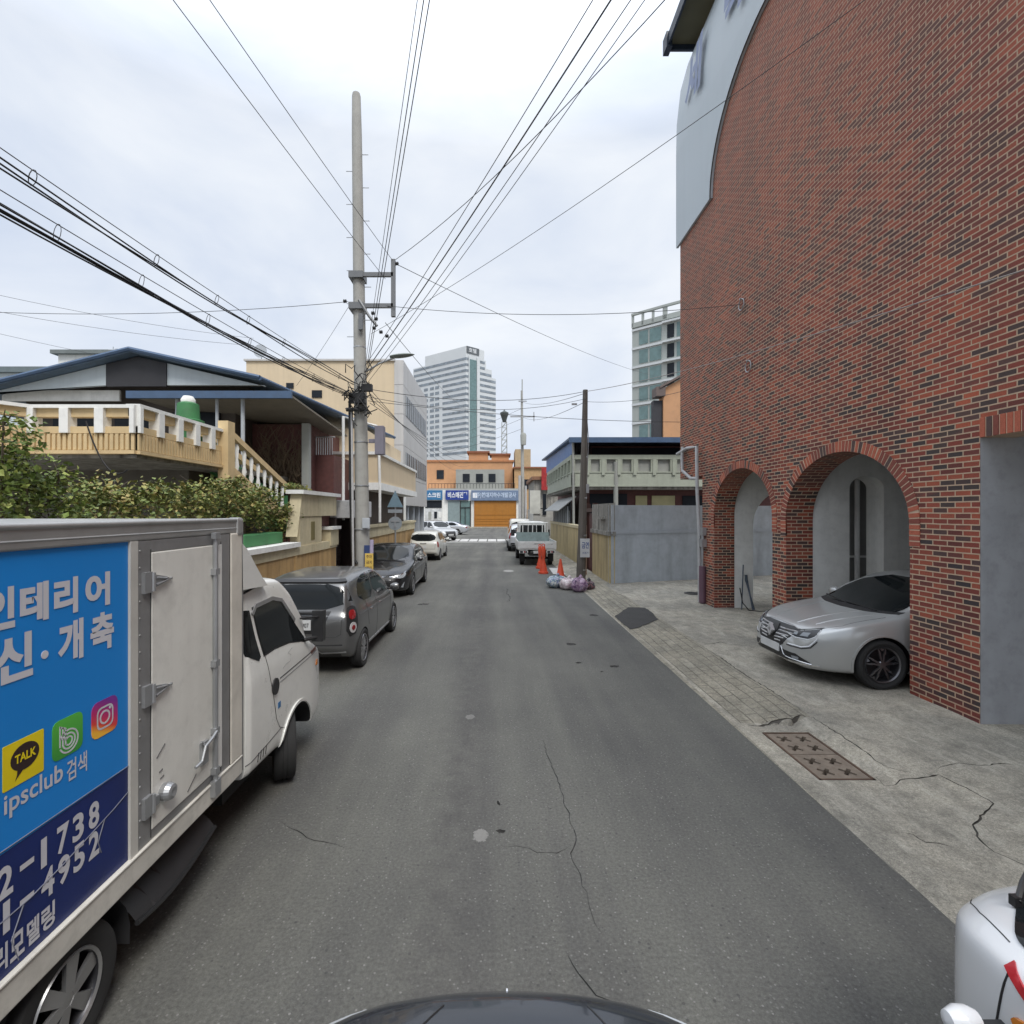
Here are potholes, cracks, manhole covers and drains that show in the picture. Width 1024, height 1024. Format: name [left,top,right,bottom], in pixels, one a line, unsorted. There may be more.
drain grate [762,732,876,780]
crack [507,735,601,932]
crack [568,956,608,1000]
crack [876,763,1024,865]
